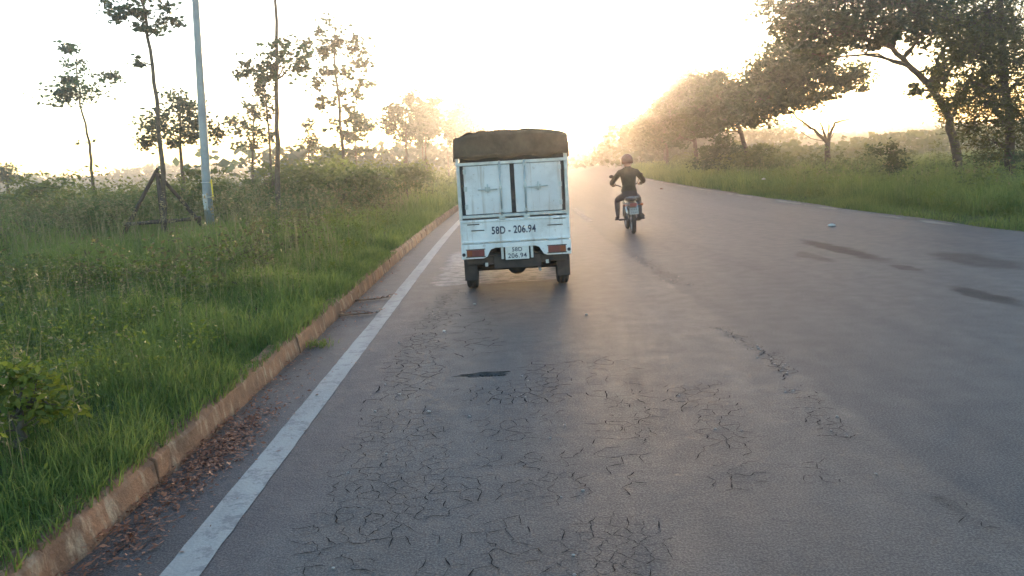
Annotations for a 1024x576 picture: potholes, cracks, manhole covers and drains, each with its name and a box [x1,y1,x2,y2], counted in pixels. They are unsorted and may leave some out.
crack [363,290,501,403]
crack [709,327,855,438]
crack [291,357,769,576]
